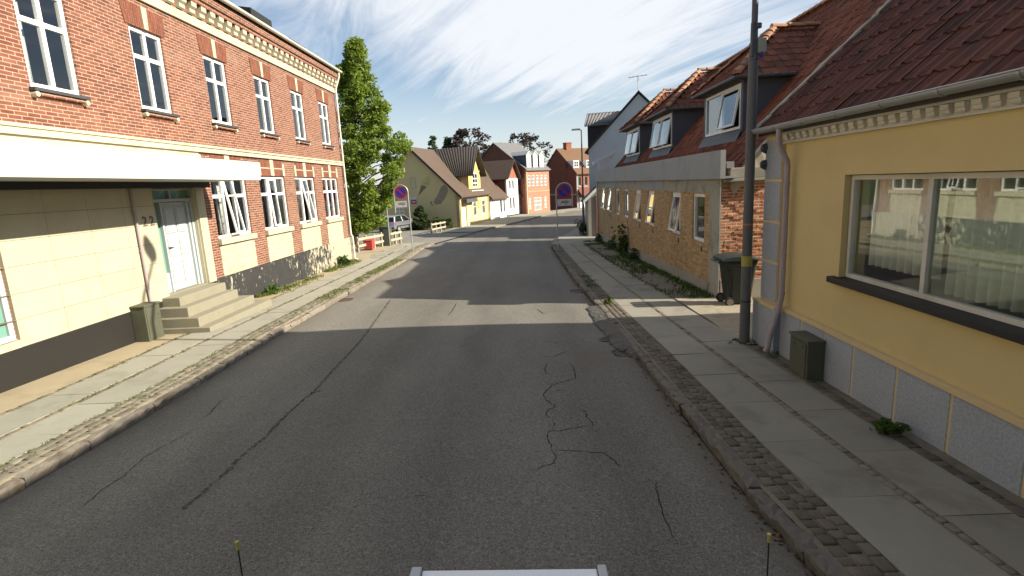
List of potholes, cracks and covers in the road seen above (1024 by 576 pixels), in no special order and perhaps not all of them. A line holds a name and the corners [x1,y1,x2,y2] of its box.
crack [535,340,624,470]
crack [655,482,678,544]
crack [181,303,389,509]
crack [86,403,219,503]
